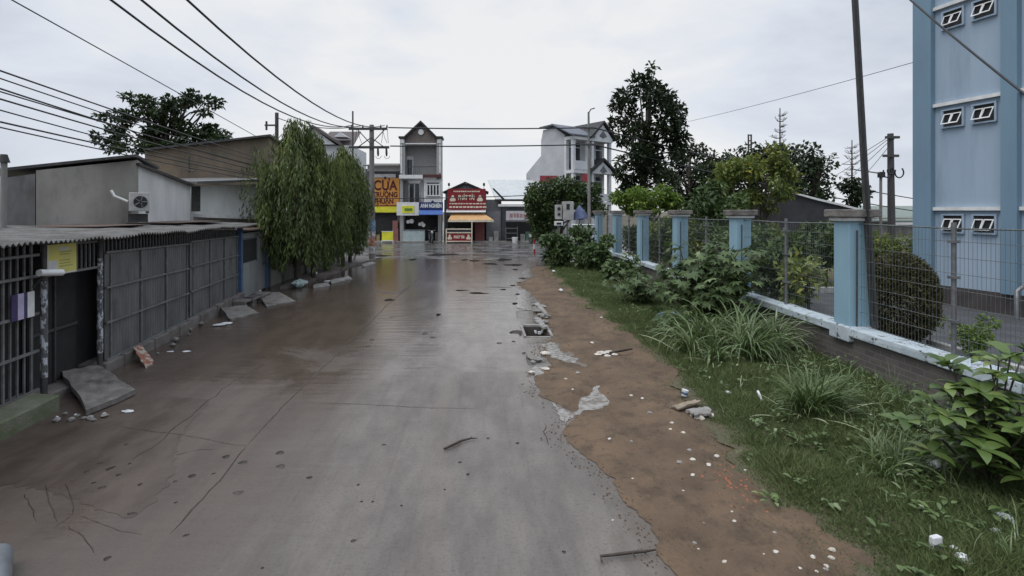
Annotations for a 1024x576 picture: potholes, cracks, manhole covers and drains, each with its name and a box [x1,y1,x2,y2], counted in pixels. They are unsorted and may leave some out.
crack [24,484,142,554]
crack [125,358,276,534]
